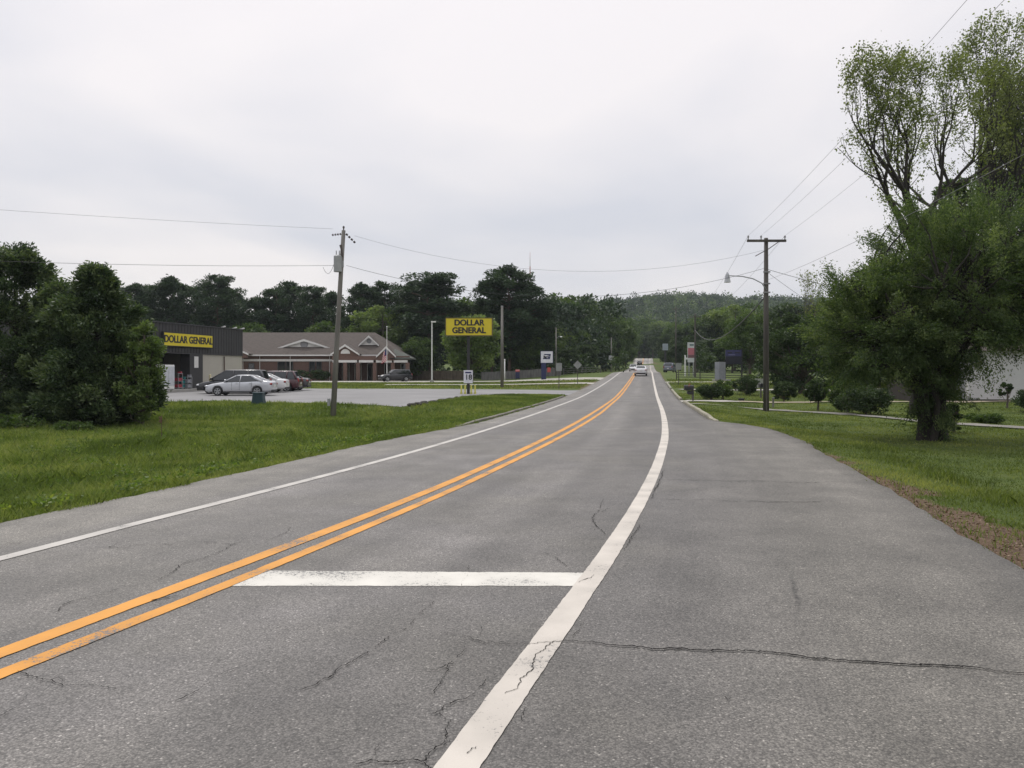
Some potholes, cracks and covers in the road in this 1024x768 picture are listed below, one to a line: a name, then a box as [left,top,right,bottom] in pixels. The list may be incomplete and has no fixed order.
crack [495,622,1023,692]
crack [58,534,281,611]
crack [20,670,113,688]
crack [356,624,501,768]
